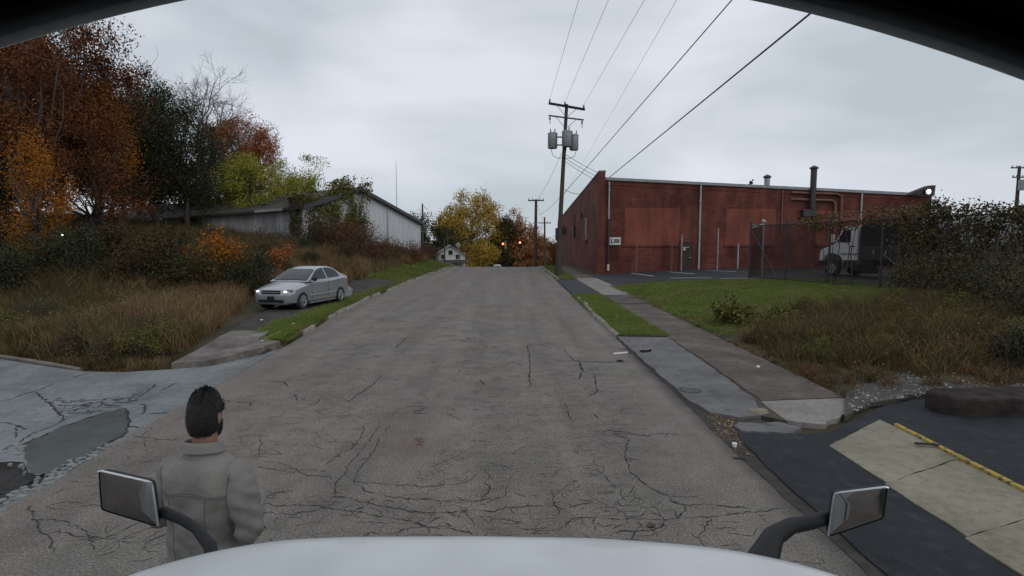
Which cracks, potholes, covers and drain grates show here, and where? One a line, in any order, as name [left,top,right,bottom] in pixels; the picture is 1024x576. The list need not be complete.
crack [1,383,177,564]
pothole [0,461,45,505]
crack [224,315,824,564]
